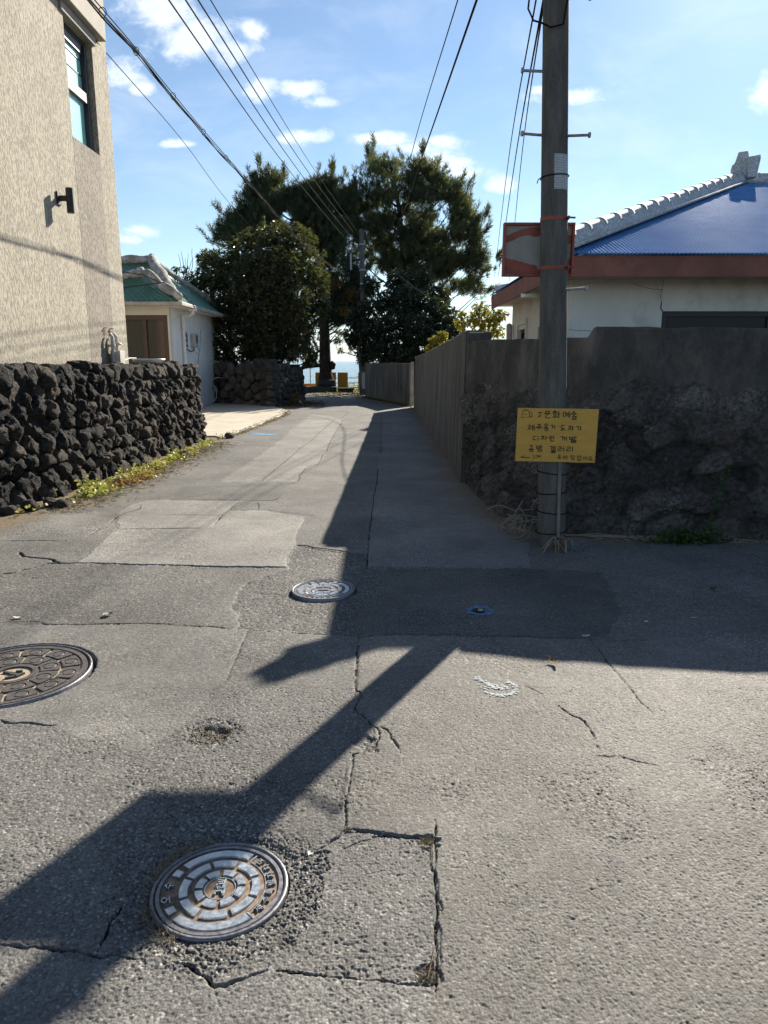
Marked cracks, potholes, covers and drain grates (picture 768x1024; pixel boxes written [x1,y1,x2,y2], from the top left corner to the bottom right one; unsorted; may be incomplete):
crack [276,827,438,993]
manhole cover [0,645,93,709]
manhole cover [292,579,355,603]
crack [11,907,143,961]
crack [292,632,643,704]
pothole [187,725,235,745]
manhole cover [149,843,289,944]
crack [183,965,249,989]
